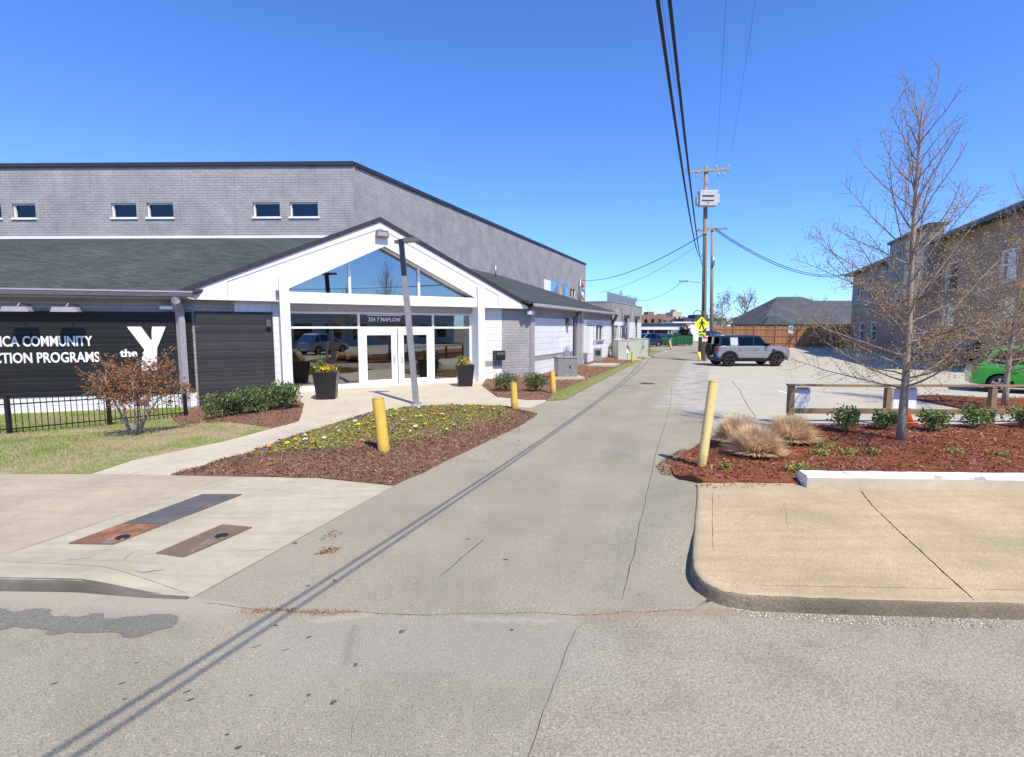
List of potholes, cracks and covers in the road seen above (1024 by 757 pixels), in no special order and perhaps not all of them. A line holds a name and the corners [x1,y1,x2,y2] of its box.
utility cover [156,524,252,557]
utility cover [69,494,242,545]
